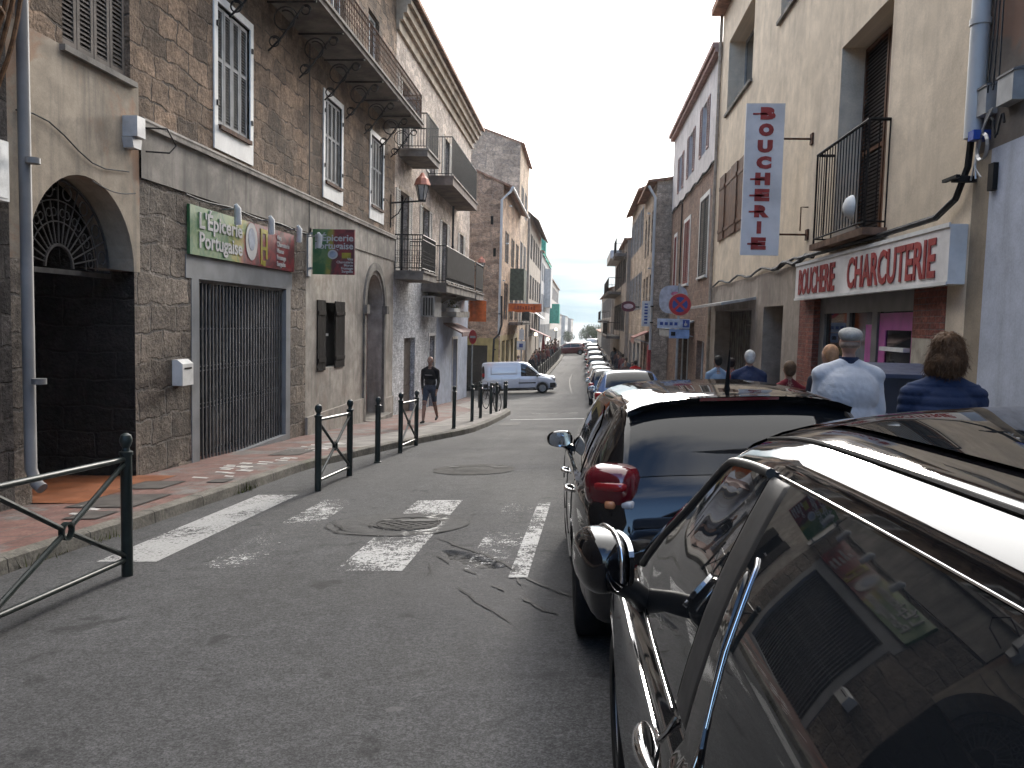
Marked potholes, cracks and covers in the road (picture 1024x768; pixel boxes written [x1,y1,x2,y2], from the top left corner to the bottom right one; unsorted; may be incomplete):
manhole cover [433,464,515,475]
crack [427,537,573,623]
pothole [395,543,531,577]
manhole cover [325,513,470,536]
